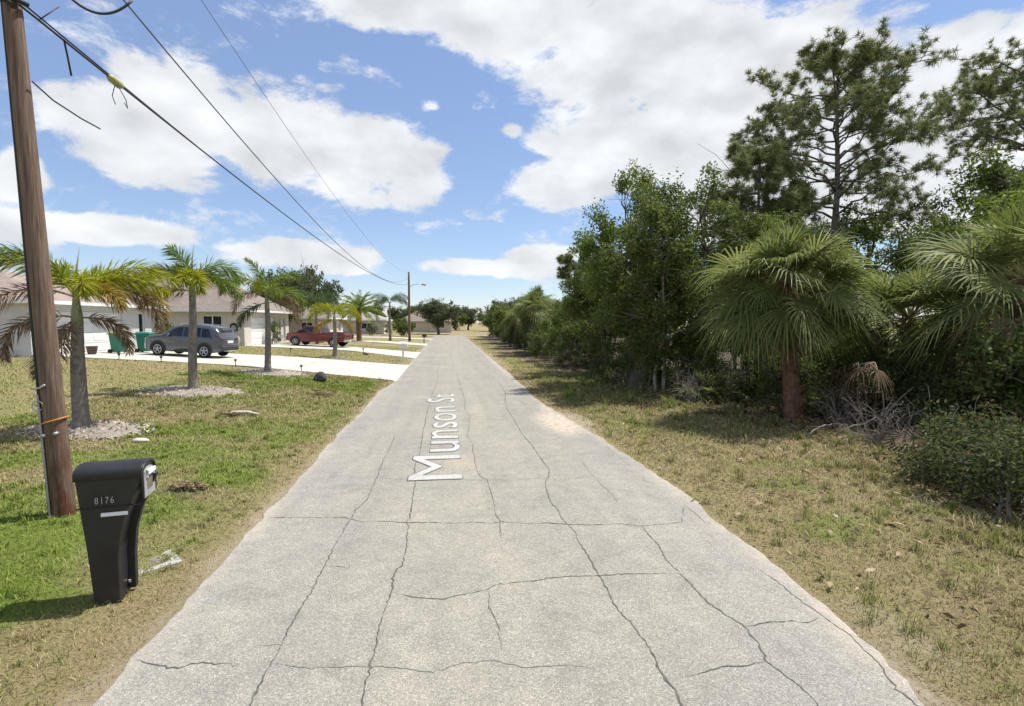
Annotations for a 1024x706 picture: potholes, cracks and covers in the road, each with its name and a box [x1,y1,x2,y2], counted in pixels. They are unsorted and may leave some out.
crack [136,370,919,706]
